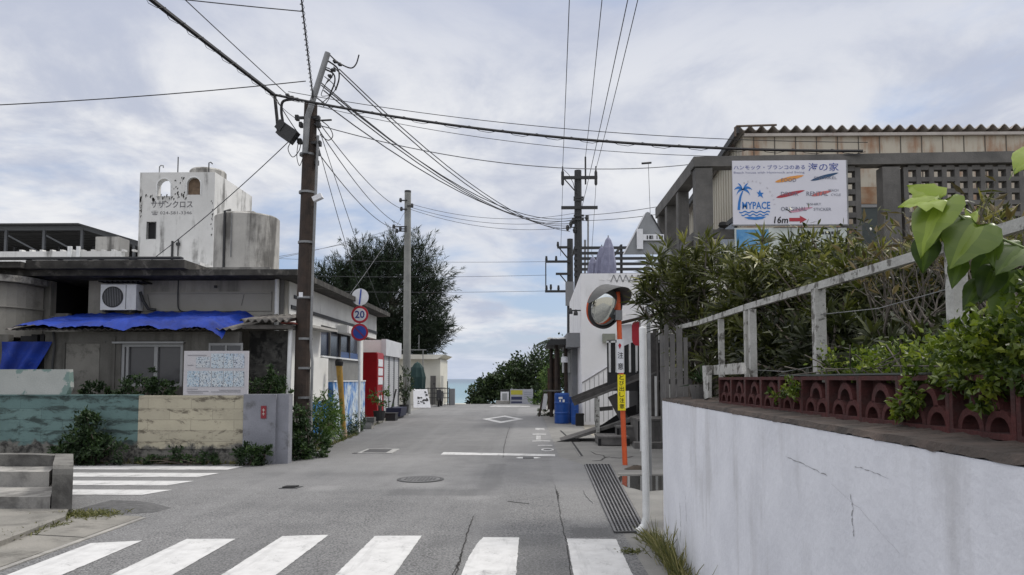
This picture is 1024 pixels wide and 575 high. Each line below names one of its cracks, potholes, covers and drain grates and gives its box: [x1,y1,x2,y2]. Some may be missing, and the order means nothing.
crack [556,491,571,575]
drain grate [584,464,647,533]
crack [452,519,473,575]
